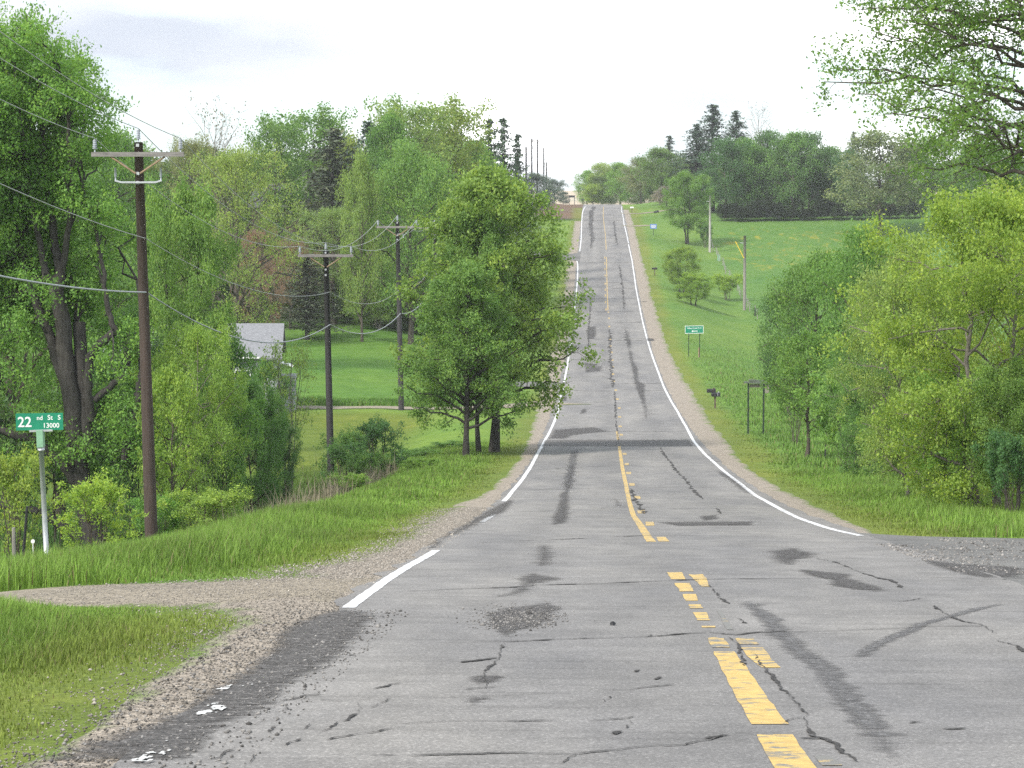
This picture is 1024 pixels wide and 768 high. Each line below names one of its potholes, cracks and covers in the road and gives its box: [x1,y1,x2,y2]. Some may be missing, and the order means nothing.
crack [566,431,721,513]
crack [411,558,1024,762]
crack [230,682,402,745]
